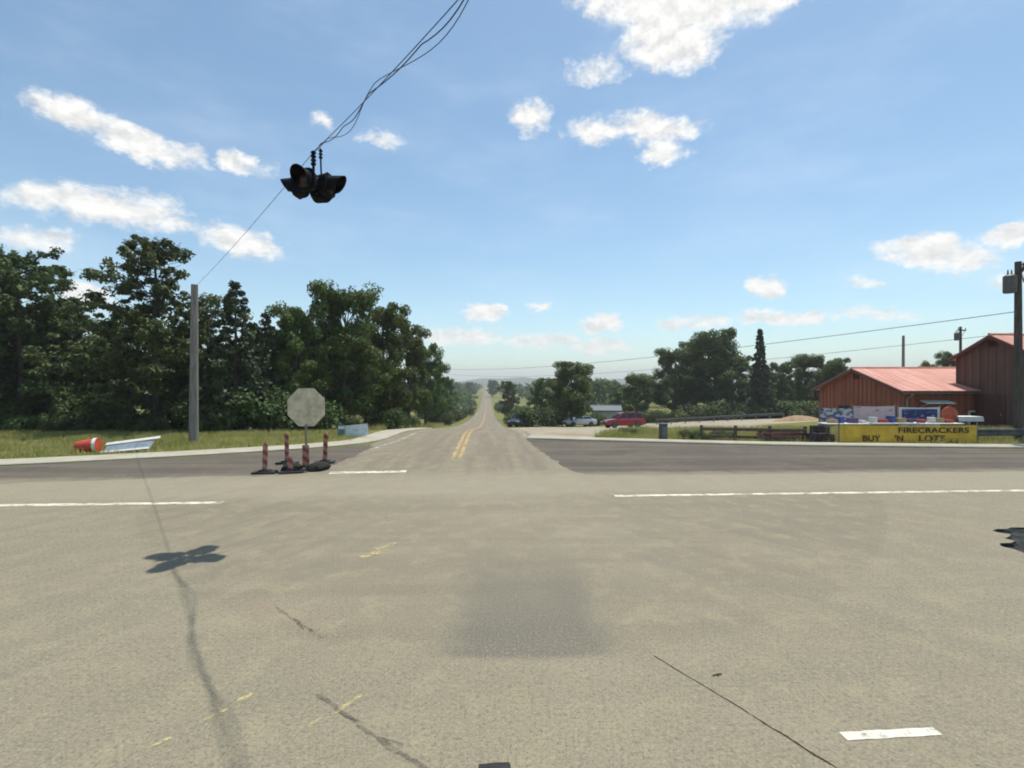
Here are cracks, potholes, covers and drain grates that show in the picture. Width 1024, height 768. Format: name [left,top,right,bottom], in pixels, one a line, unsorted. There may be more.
pothole [992,527,1024,553]
crack [317,694,428,768]
